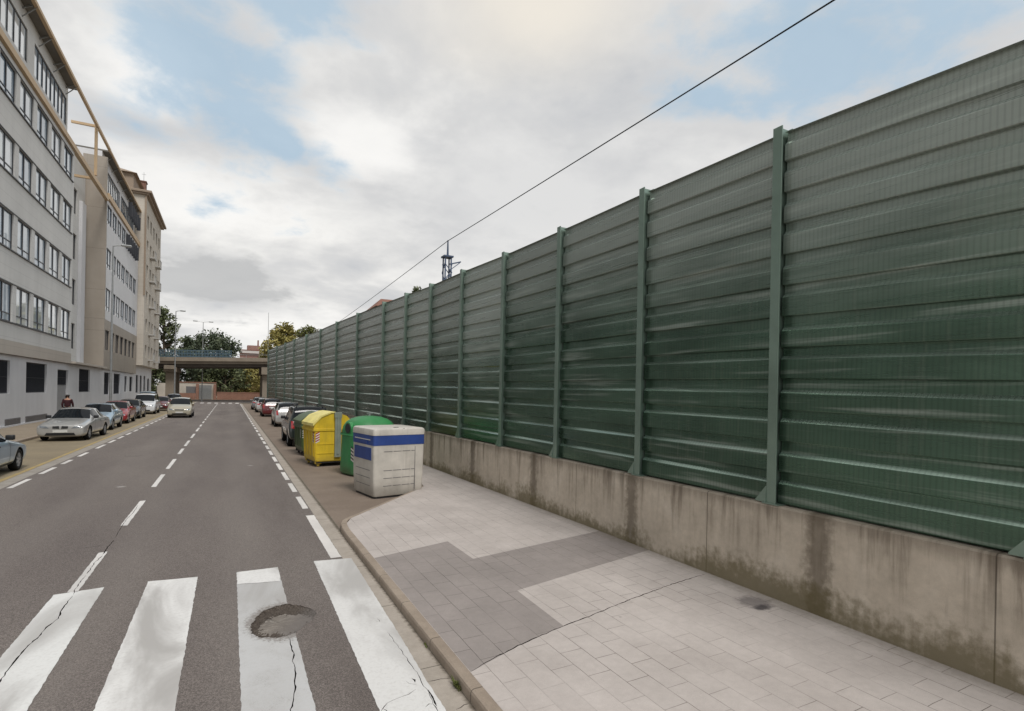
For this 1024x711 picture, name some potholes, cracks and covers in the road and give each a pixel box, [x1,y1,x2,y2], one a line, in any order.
pothole [251,604,317,638]
crack [0,507,137,682]
crack [379,621,451,711]
